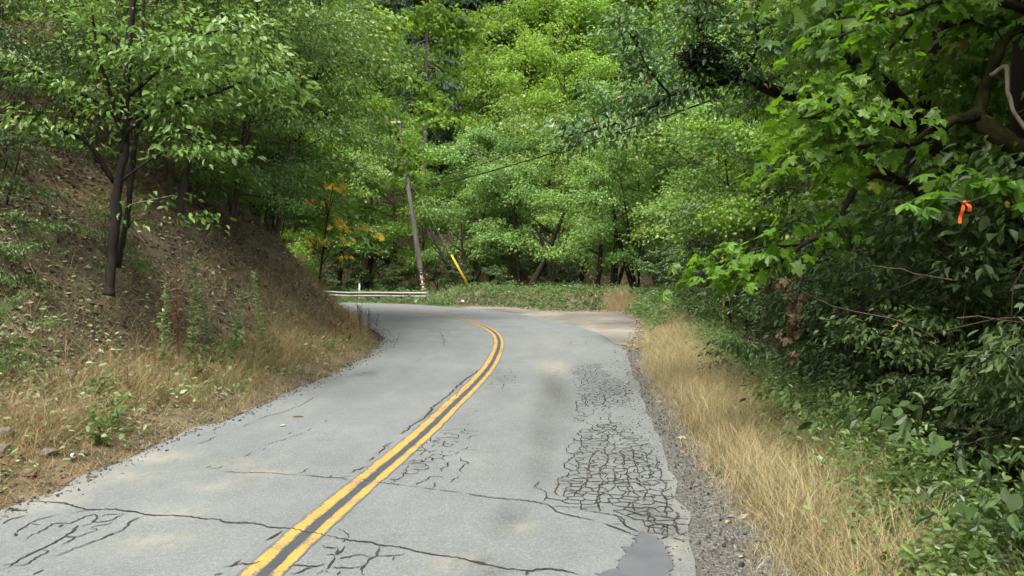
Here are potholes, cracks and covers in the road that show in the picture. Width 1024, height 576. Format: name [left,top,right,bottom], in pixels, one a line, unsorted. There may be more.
crack [3,349,690,575]
